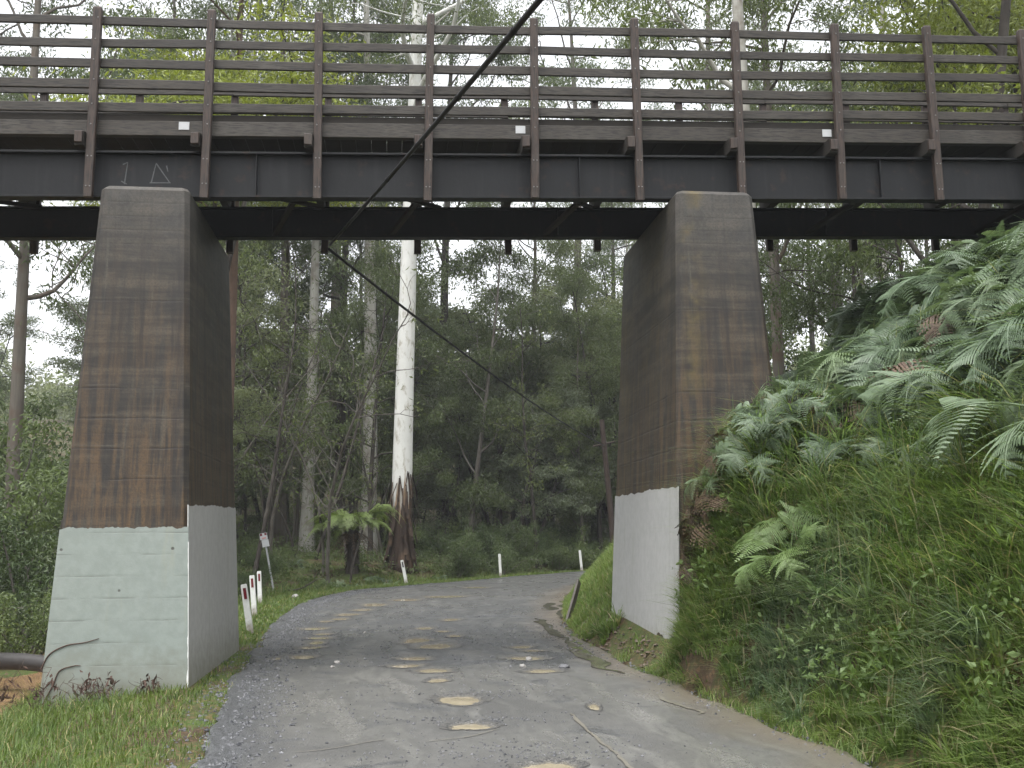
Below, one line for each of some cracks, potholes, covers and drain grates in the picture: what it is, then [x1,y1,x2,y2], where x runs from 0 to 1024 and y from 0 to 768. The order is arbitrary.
pothole [407,641,465,650]
crack [570,713,633,768]
pothole [394,636,441,645]
pothole [507,756,590,768]
pothole [584,701,604,711]
pothole [428,693,492,707]
pothole [439,720,505,730]
